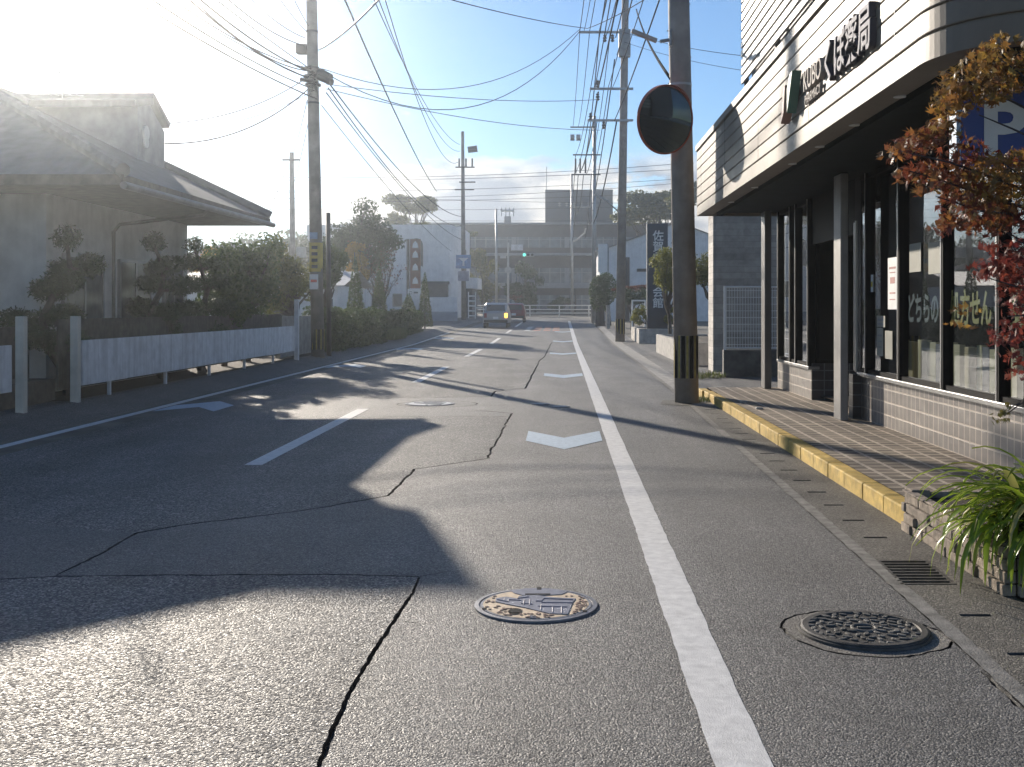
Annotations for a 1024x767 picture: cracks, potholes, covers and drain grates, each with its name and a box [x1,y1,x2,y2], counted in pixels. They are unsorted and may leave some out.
drain grate [877,560,957,585]
manhole cover [798,610,933,652]
crack [57,344,551,575]
manhole cover [474,587,597,623]
